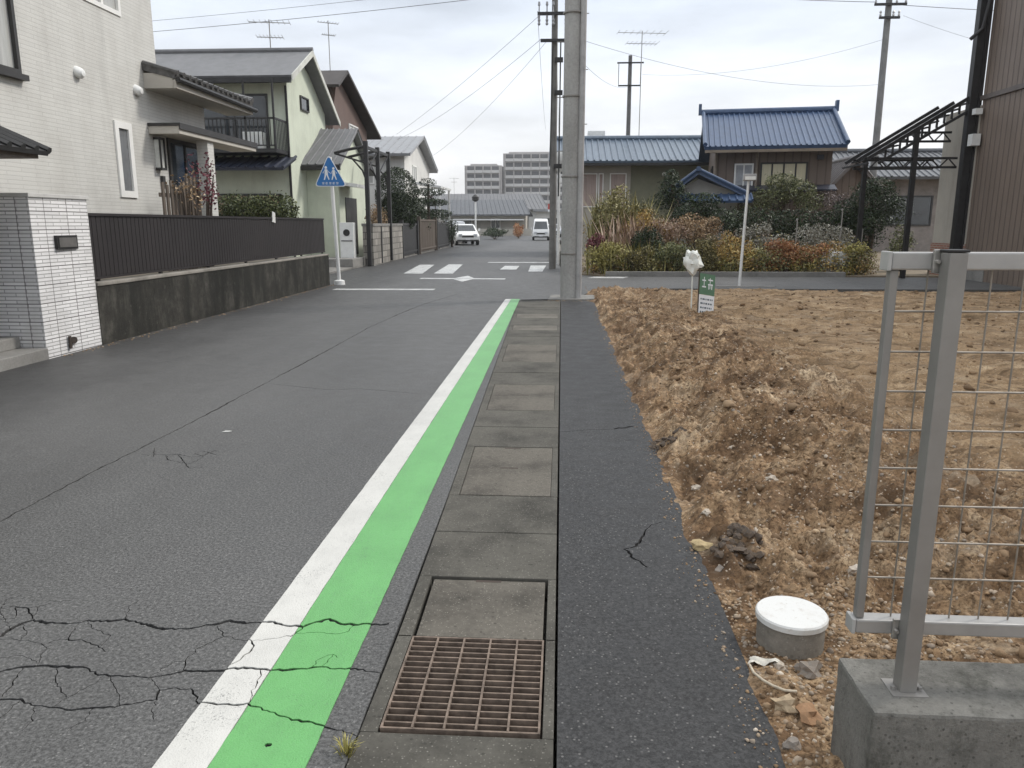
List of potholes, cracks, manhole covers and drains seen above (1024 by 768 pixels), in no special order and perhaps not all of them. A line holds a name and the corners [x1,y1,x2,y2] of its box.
drain grate [380,636,545,739]
crack [0,604,388,741]
crack [6,295,453,519]
crack [627,530,646,566]
